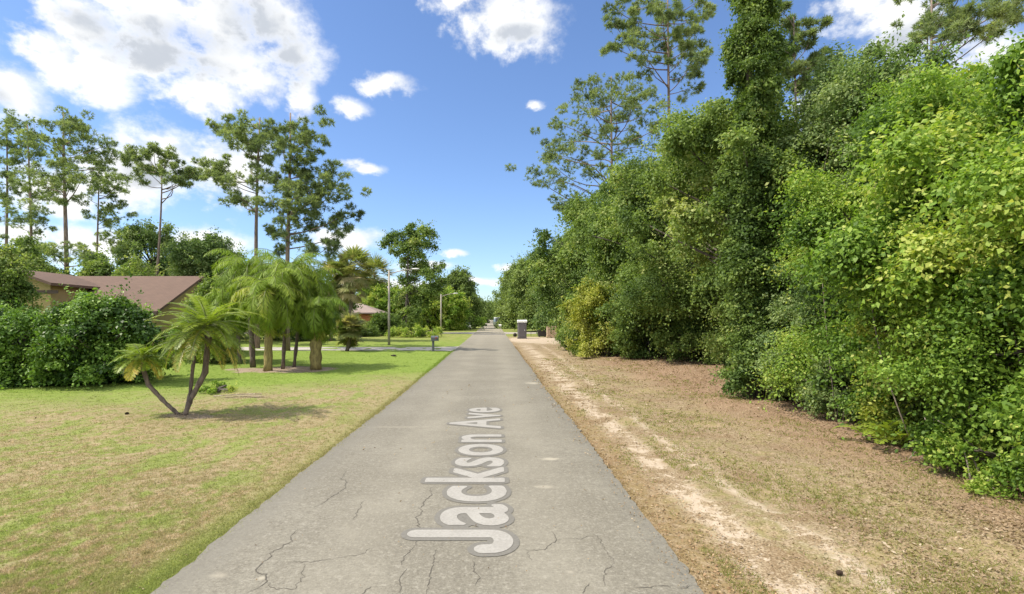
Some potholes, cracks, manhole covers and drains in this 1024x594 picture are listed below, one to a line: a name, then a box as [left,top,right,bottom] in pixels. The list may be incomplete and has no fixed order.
crack [399,487,432,592]
crack [526,534,614,593]
crack [249,530,368,592]
